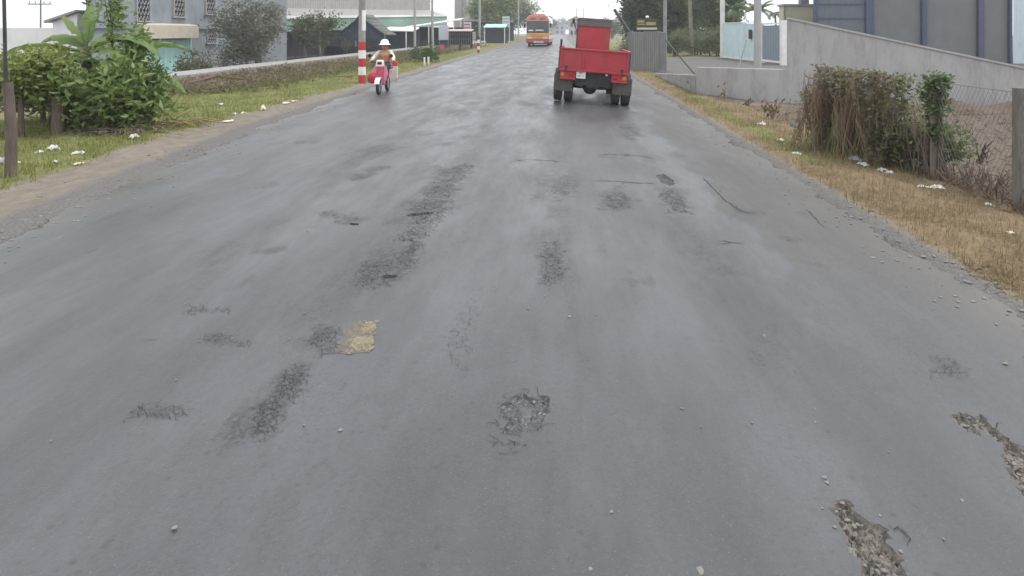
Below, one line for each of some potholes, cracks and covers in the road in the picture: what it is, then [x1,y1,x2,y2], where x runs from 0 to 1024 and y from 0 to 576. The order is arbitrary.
crack [535,241,566,284]
crack [242,324,347,442]
crack [127,401,195,423]
crack [352,163,476,290]
crack [659,188,695,214]
crack [929,357,970,379]
pothole [499,393,550,435]
pothole [829,499,907,576]
crack [598,180,639,210]
pothole [951,412,1024,497]
pothole [656,174,675,186]
